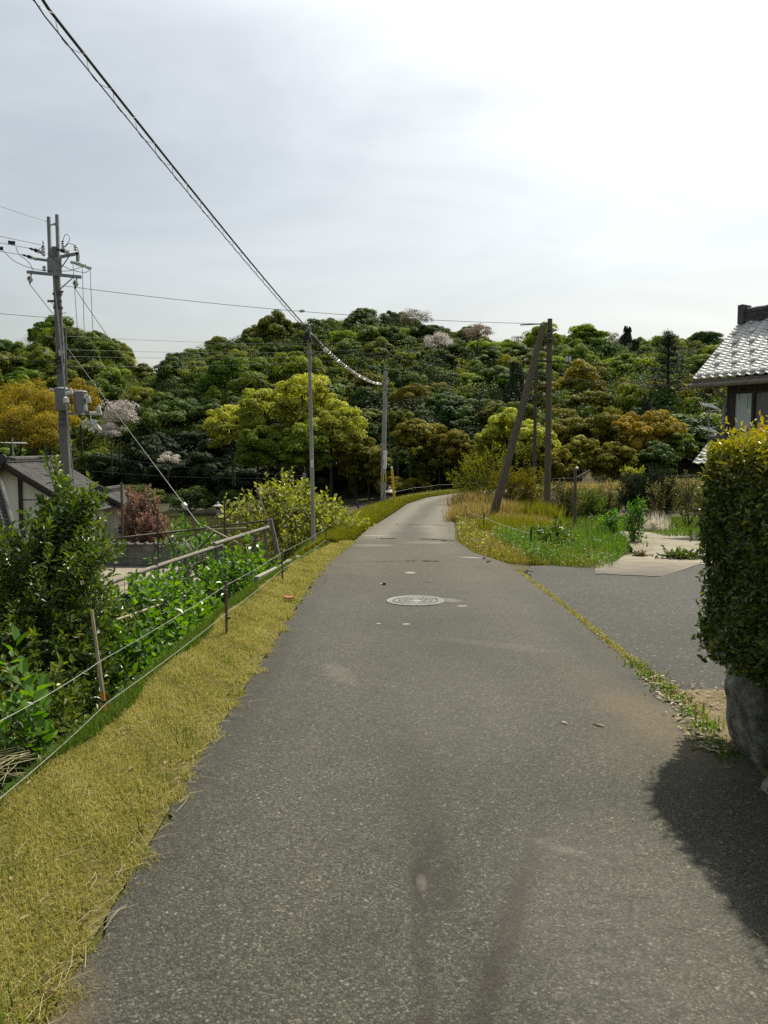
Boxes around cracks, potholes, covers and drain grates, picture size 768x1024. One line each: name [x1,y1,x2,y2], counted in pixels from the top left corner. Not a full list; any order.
manhole cover [387,595,444,606]
